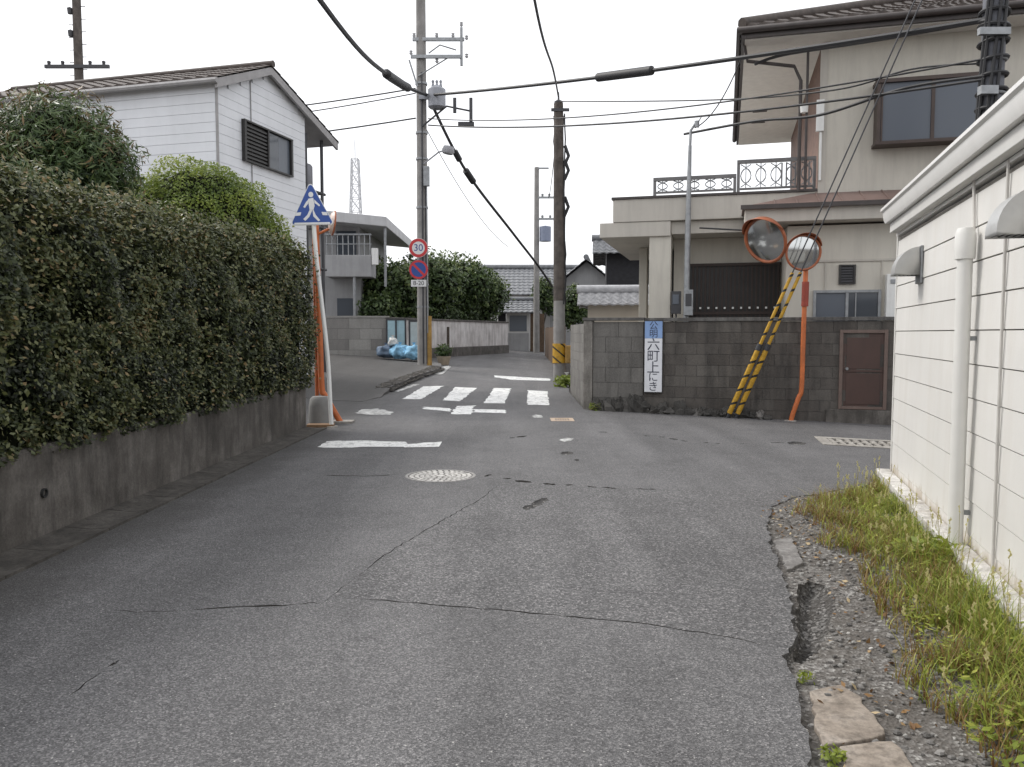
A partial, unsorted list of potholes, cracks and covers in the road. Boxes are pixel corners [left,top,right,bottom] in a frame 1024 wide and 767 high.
crack [346,598,774,648]
manhole cover [405,469,476,482]
crack [117,602,317,612]
pothole [792,581,834,664]
